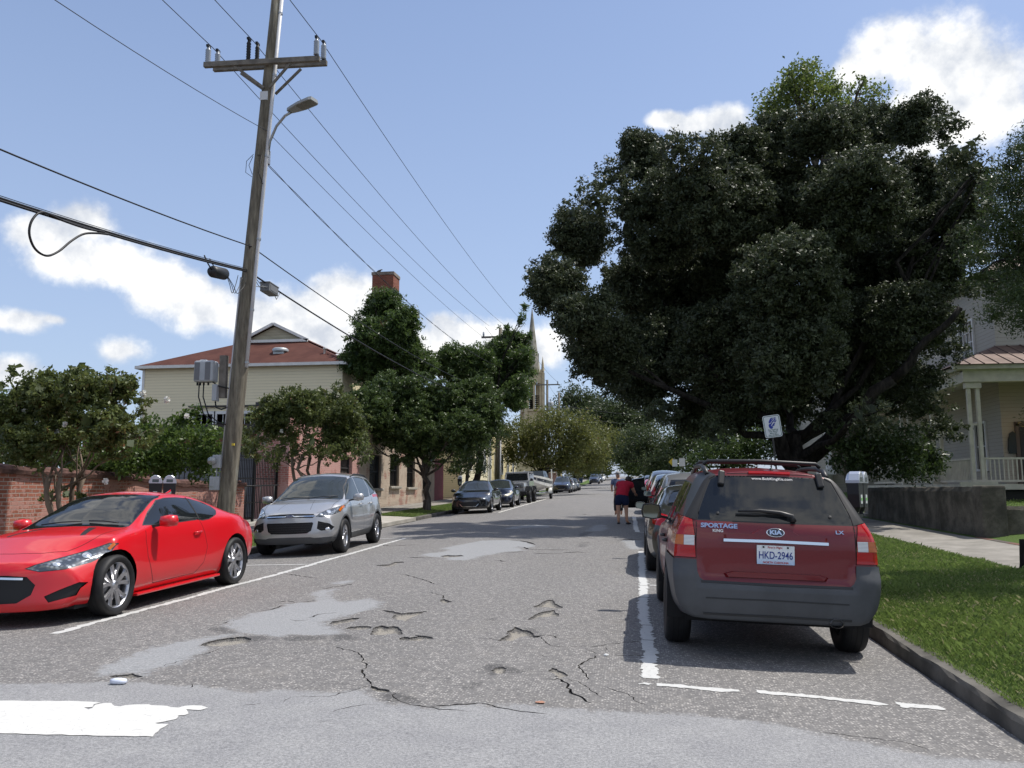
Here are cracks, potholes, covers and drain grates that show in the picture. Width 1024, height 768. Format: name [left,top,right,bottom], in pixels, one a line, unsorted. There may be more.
pothole [200,637,251,647]
pothole [528,610,559,620]
pothole [370,625,403,635]
pothole [383,610,427,622]
pothole [534,600,563,609]
crack [306,635,657,714]
pothole [498,627,540,641]
